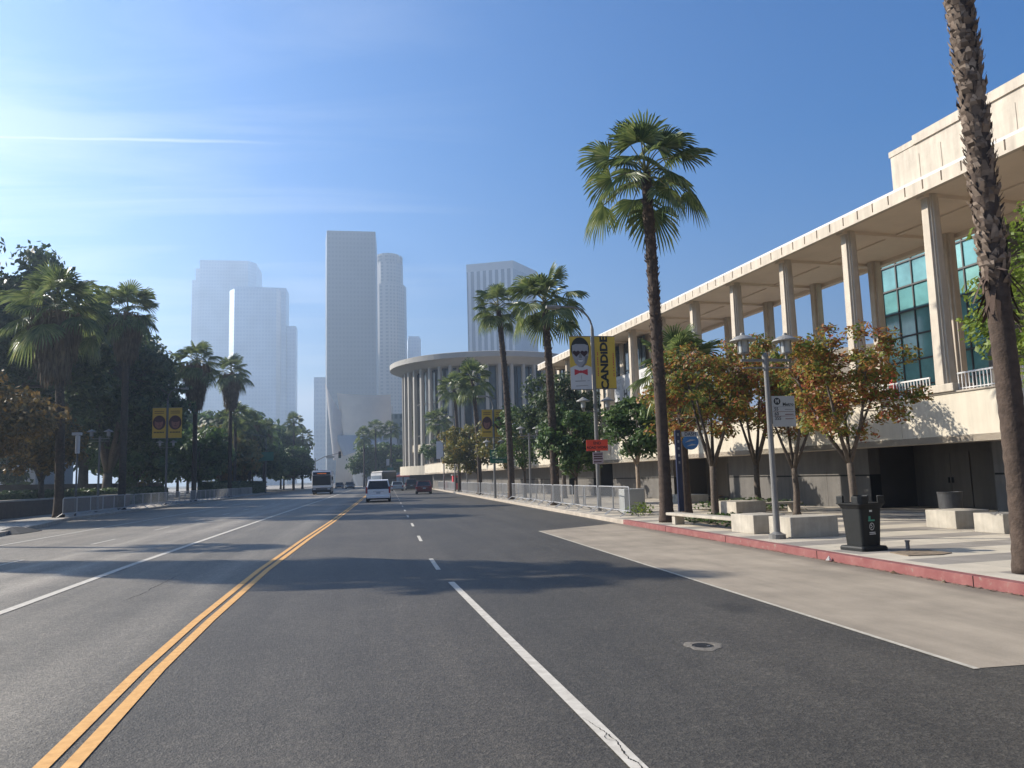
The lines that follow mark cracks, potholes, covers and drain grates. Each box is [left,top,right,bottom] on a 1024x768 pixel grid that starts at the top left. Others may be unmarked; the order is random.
manhole cover [683,642,722,651]
crack [584,718,643,768]
